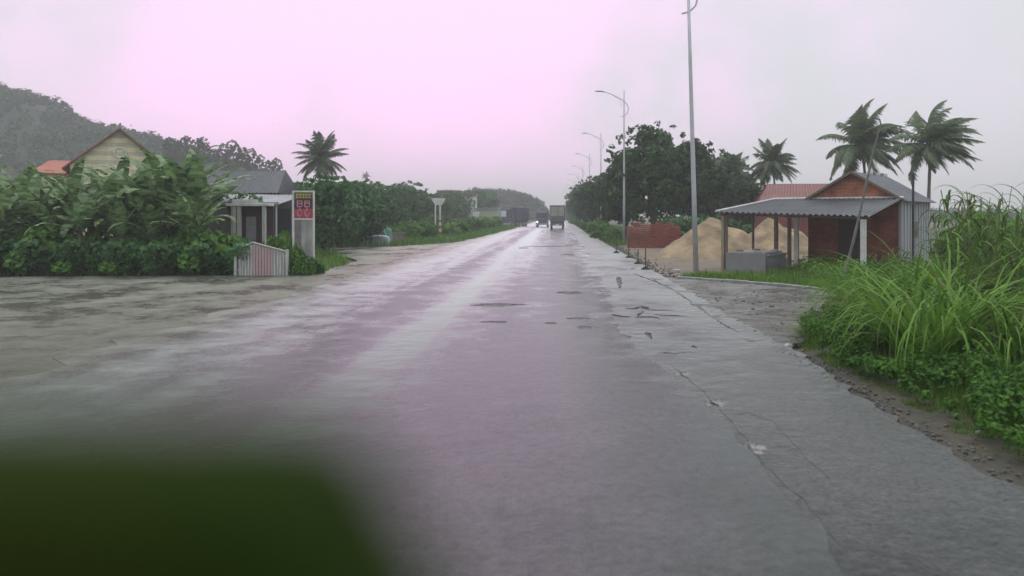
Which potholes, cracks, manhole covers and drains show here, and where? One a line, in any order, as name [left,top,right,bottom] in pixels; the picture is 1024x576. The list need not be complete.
pothole [741,442,768,454]
